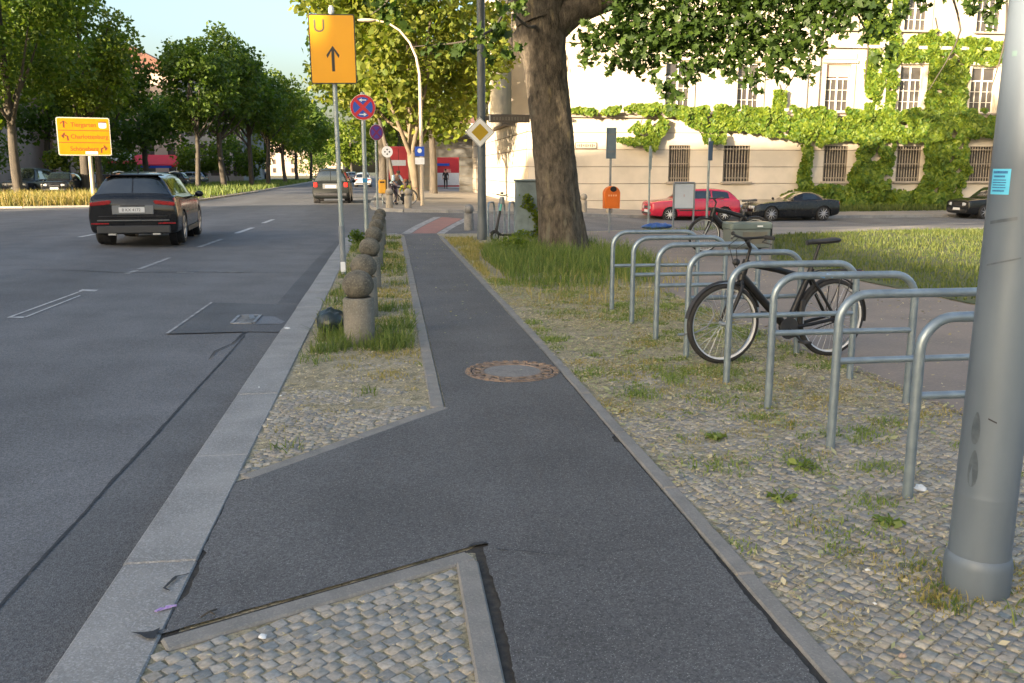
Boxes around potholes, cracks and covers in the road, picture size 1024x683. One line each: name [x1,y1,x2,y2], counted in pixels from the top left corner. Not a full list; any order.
manhole cover [465,360,560,382]
